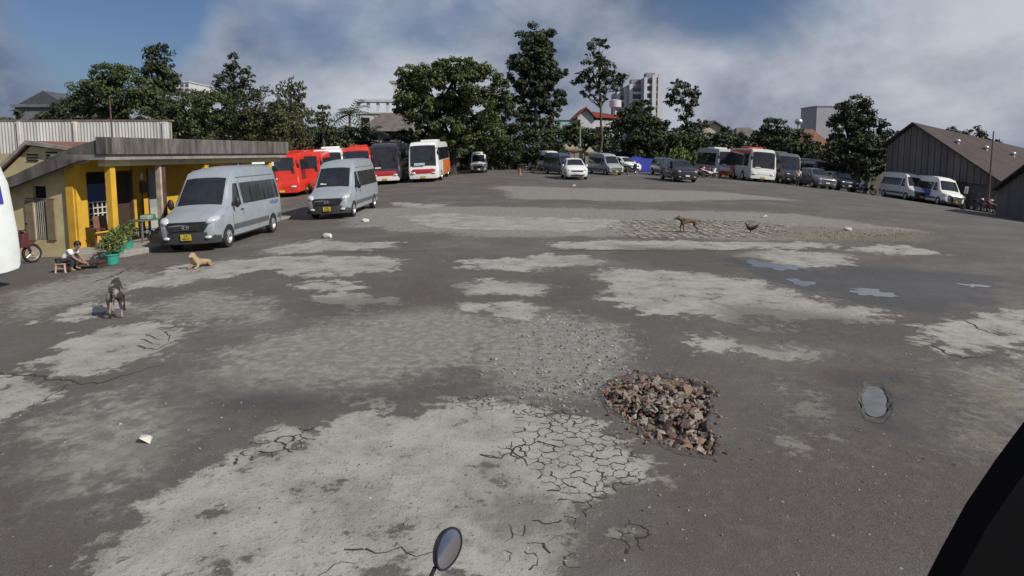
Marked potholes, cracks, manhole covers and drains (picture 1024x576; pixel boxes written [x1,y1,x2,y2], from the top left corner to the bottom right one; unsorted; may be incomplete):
pothole [857,381,892,423]
crack [233,427,313,465]
pothole [597,371,722,461]
crack [318,546,432,576]
crack [0,332,170,409]
crack [610,519,652,554]
crack [450,393,646,524]
